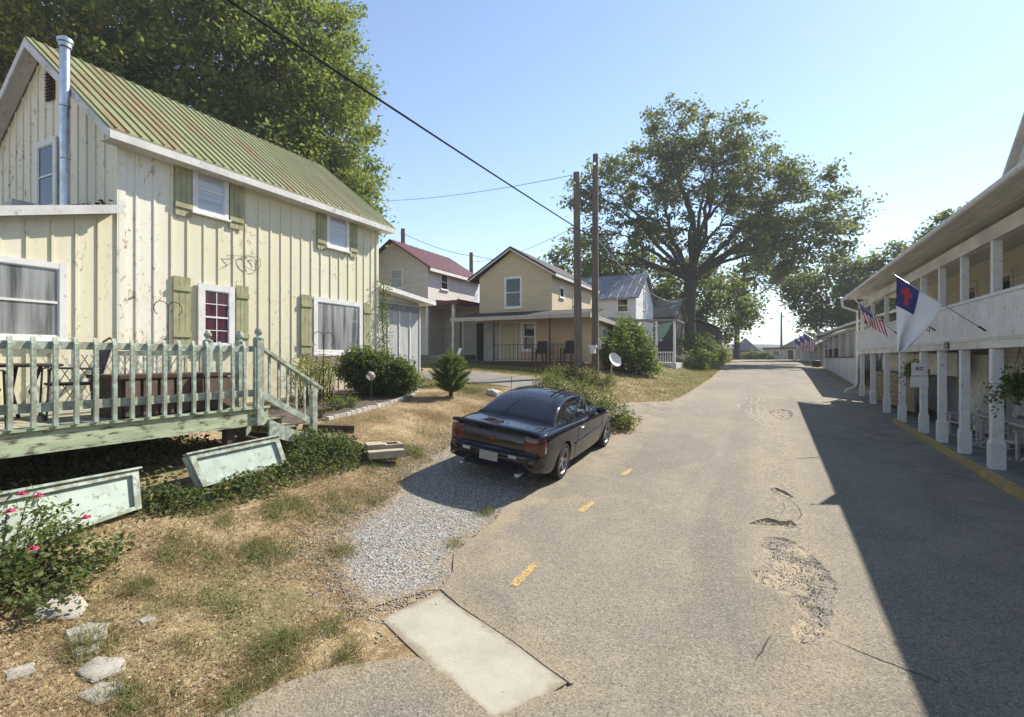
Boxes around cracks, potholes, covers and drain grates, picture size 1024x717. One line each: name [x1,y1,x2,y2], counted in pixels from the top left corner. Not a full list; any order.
pothole [749,518,797,528]
pothole [752,537,838,647]
crack [735,396,772,430]
pothole [771,488,794,498]
pothole [770,409,794,419]
crack [838,642,947,686]
